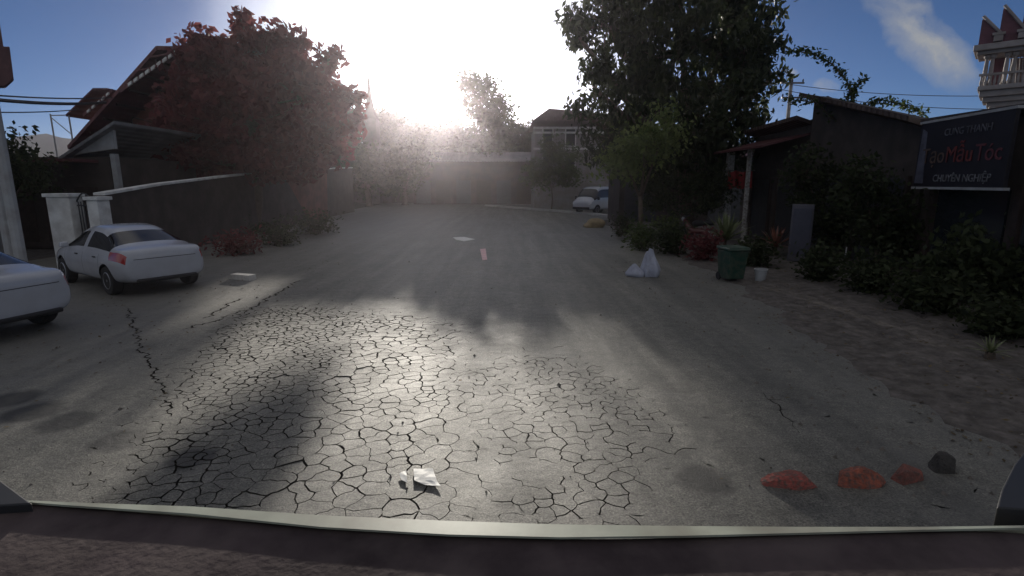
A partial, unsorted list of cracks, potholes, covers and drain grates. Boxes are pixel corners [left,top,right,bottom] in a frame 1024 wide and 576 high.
crack [437,347,694,525]
crack [183,281,298,330]
crack [72,302,523,520]
